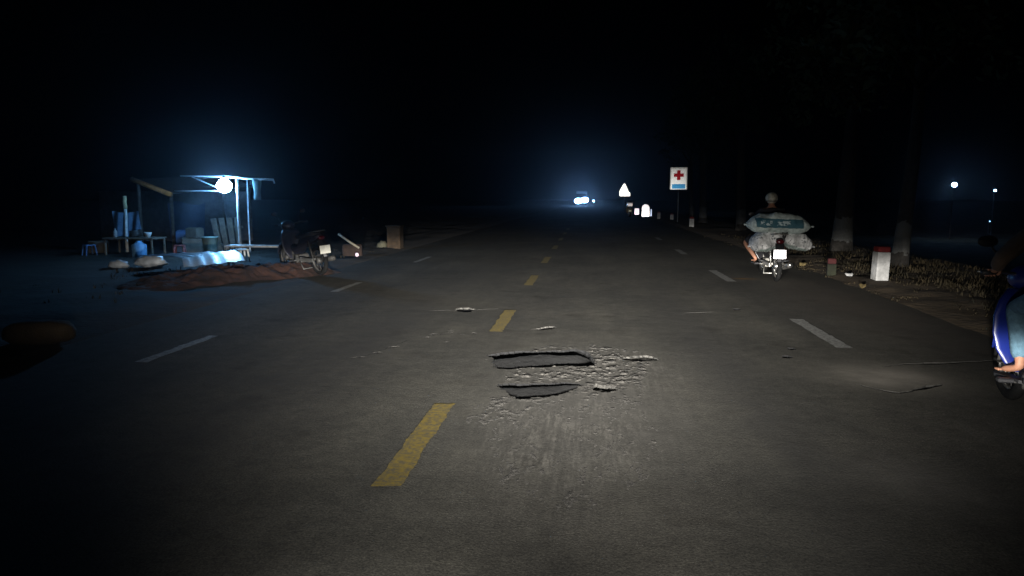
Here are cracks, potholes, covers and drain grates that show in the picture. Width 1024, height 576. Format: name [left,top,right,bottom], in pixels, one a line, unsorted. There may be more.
crack [858,384,943,393]
pothole [486,349,597,369]
pothole [497,382,581,399]
